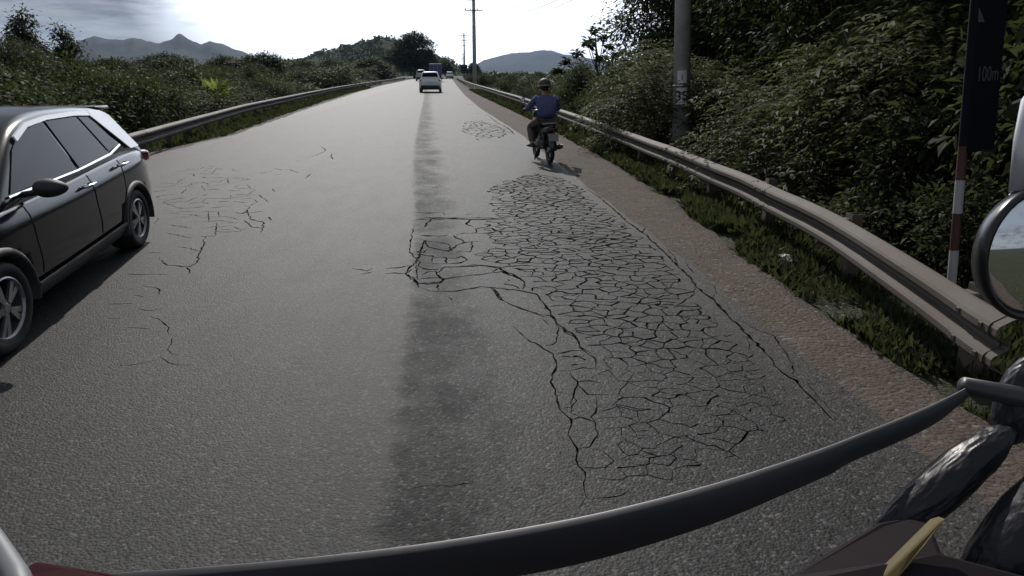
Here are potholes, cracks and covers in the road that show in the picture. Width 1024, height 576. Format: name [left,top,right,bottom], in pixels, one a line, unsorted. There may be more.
crack [385,173,838,508]
crack [107,166,281,366]
crack [462,104,514,140]
